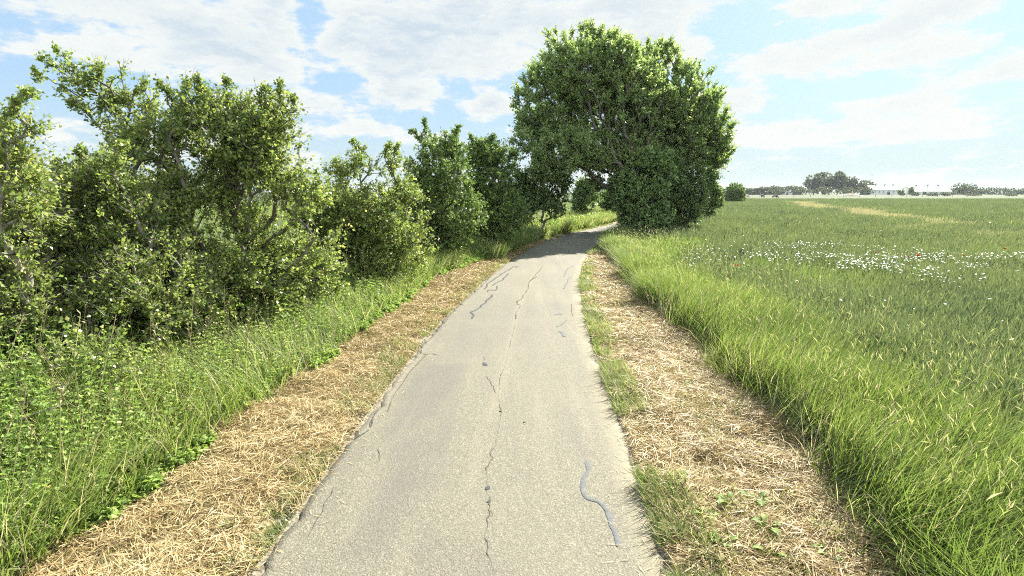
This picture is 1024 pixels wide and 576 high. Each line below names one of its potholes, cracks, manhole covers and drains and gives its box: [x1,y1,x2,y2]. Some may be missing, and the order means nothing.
crack [484,269,541,566]
crack [309,320,447,534]
